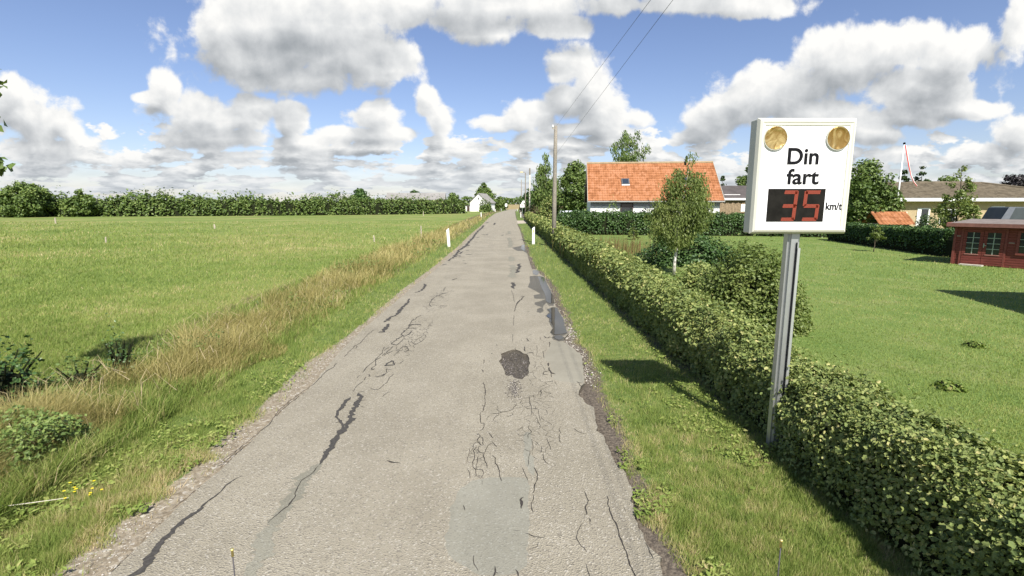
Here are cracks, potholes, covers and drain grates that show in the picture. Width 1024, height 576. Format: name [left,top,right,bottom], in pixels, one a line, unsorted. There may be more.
crack [576,491,653,576]
pothole [499,349,532,405]
crack [110,222,495,576]
crack [467,264,585,511]
